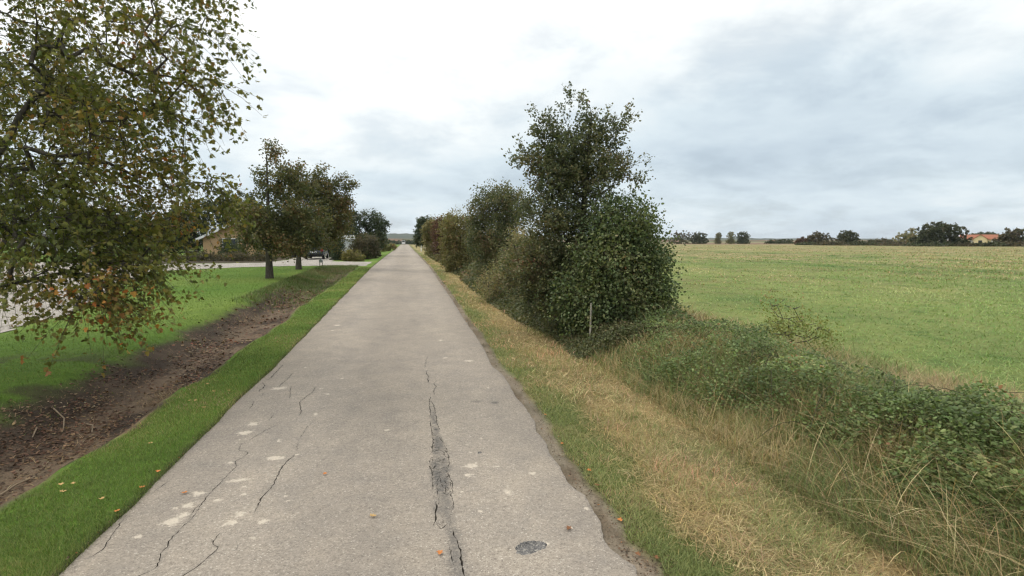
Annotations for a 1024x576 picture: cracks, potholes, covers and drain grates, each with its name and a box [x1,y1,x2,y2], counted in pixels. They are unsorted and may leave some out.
crack [139,417,272,576]
crack [254,431,305,513]
crack [426,372,465,576]
